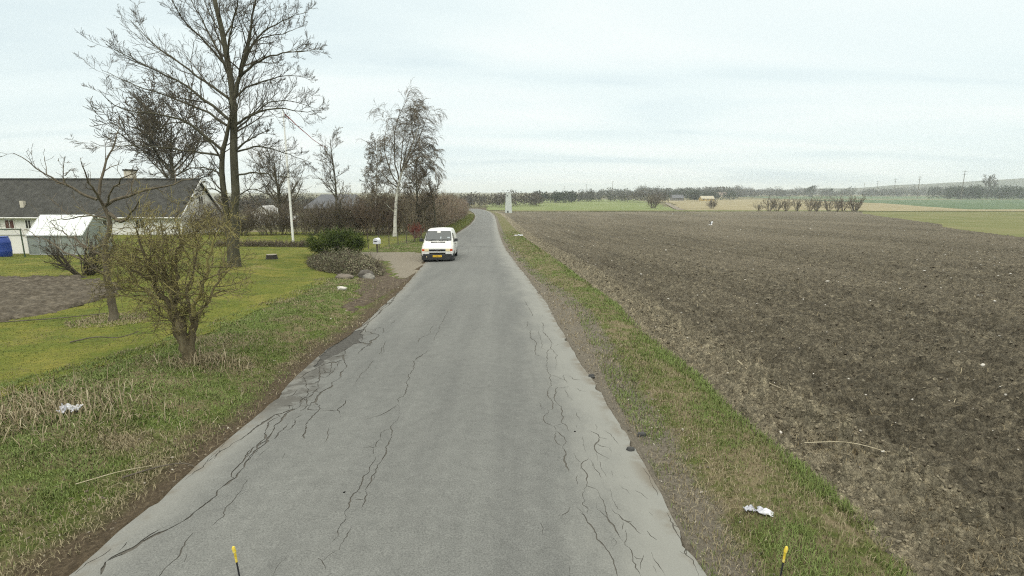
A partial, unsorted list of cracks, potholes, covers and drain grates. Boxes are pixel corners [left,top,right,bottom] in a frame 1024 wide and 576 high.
crack [318,311,448,568]
crack [75,290,402,576]
crack [524,300,699,575]
